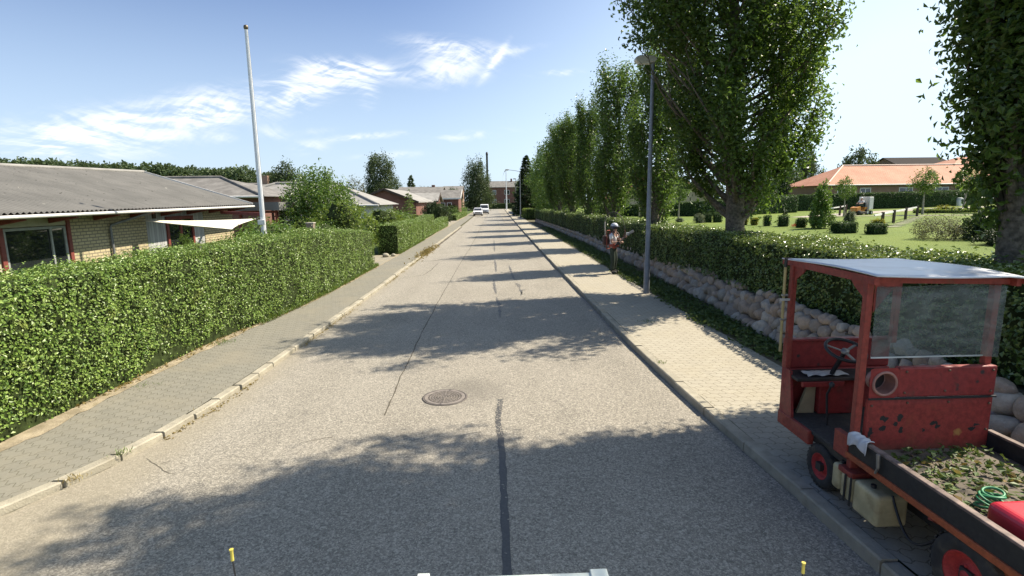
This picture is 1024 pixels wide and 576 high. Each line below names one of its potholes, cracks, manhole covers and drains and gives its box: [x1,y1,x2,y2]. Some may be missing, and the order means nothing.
manhole cover [422,389,468,406]
